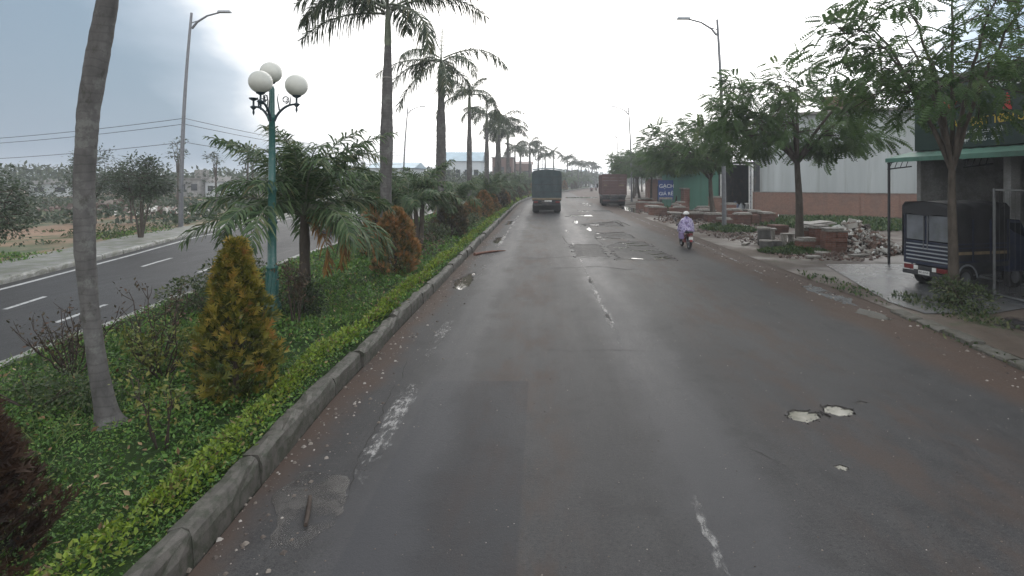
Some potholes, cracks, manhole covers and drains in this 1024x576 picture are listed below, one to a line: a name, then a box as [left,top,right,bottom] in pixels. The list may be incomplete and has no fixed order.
pothole [453,272,475,290]
pothole [819,404,857,417]
pothole [784,409,828,424]
